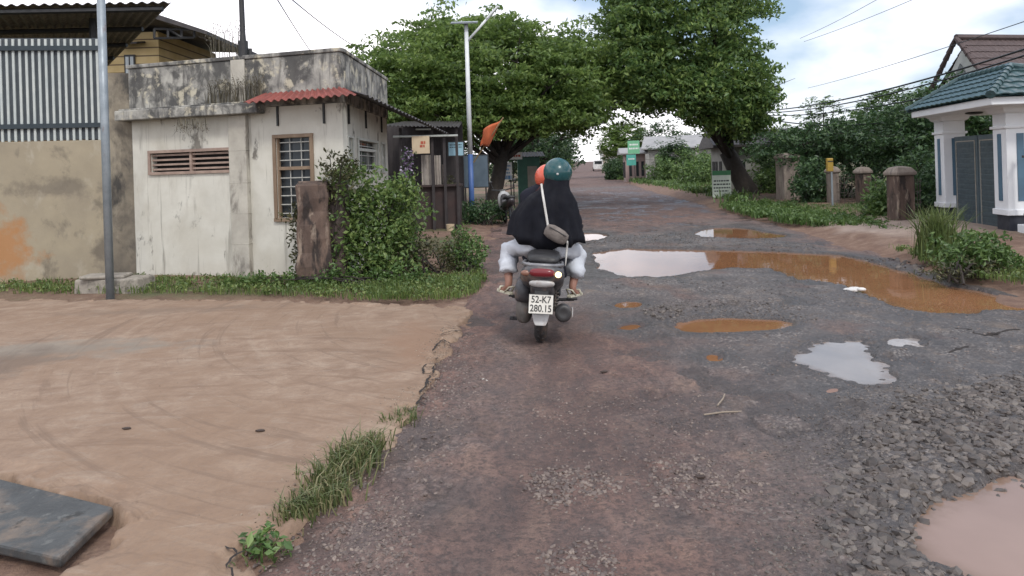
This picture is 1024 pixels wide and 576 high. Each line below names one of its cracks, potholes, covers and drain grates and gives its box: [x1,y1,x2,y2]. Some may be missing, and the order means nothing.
crack [949,327,1020,353]
pothole [880,334,935,348]
pothole [665,314,800,334]
pothole [693,226,791,239]
pothole [782,336,903,387]
pothole [611,319,653,331]
pothole [589,246,1024,314]
pothole [897,462,1024,576]
